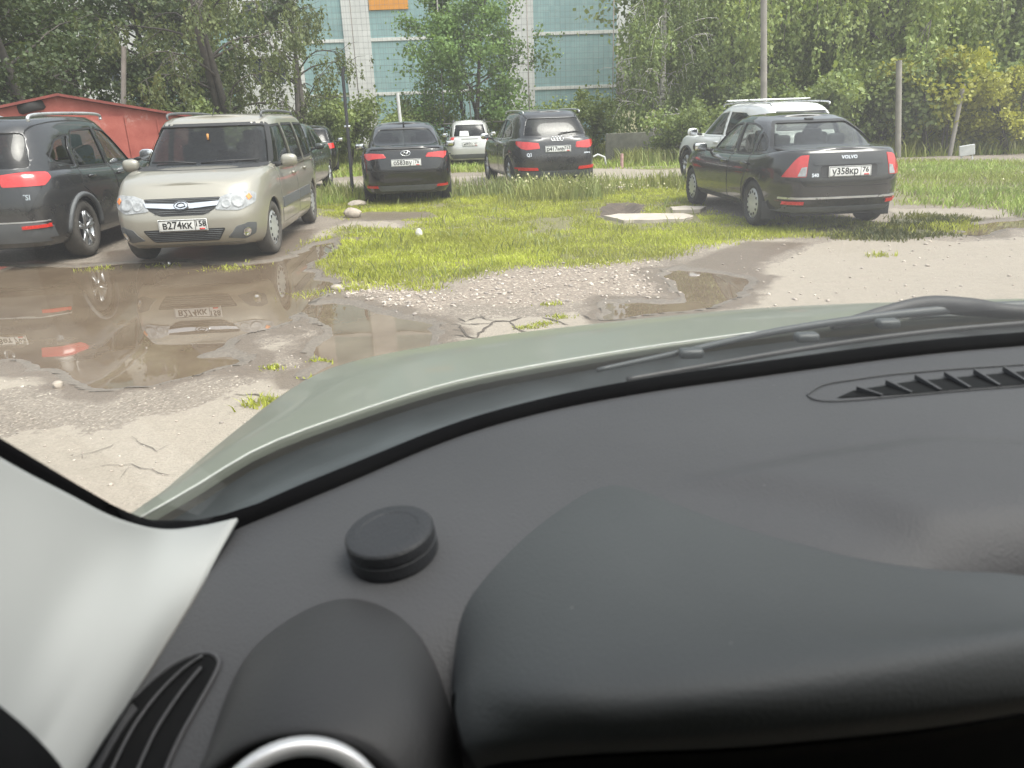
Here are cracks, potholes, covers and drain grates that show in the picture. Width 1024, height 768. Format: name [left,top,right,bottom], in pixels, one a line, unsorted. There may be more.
crack [68,438,170,475]
pothole [0,238,343,392]
pothole [595,265,760,320]
crack [451,314,594,338]
